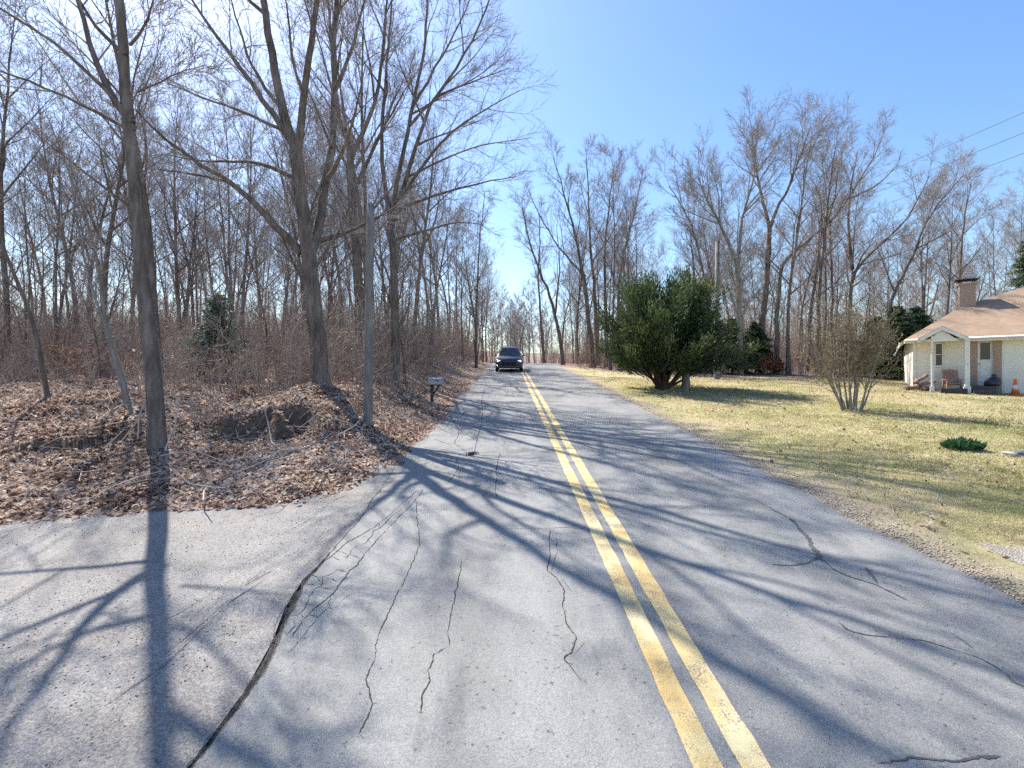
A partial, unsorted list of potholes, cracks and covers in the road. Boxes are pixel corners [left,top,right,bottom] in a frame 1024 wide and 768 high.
crack [492,515,584,681]
crack [420,560,462,712]
crack [284,489,423,735]
